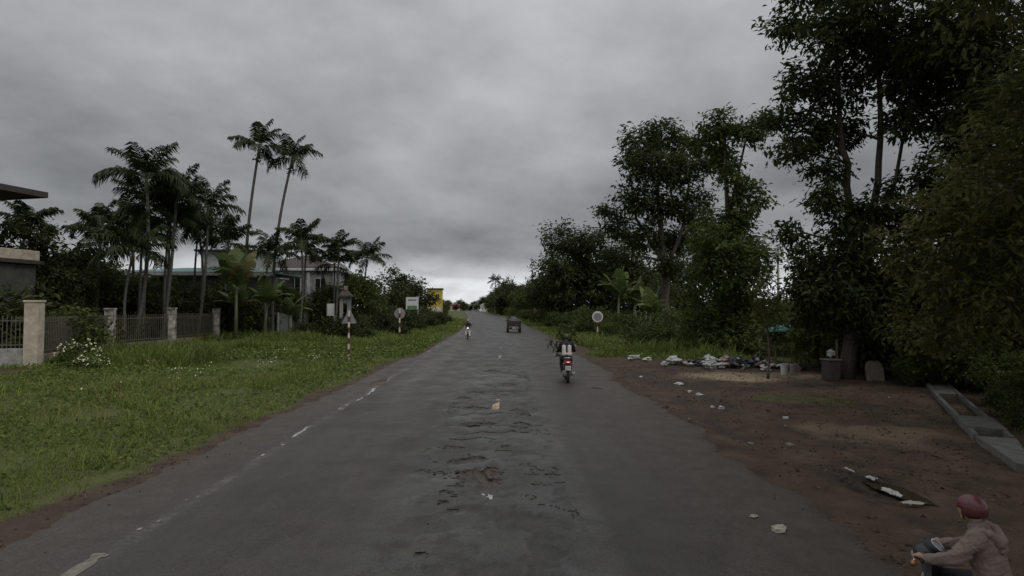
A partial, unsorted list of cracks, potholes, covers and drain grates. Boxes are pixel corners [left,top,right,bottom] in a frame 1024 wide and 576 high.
crack [415,371,580,519]
pothole [446,456,487,464]
pothole [446,466,503,488]
